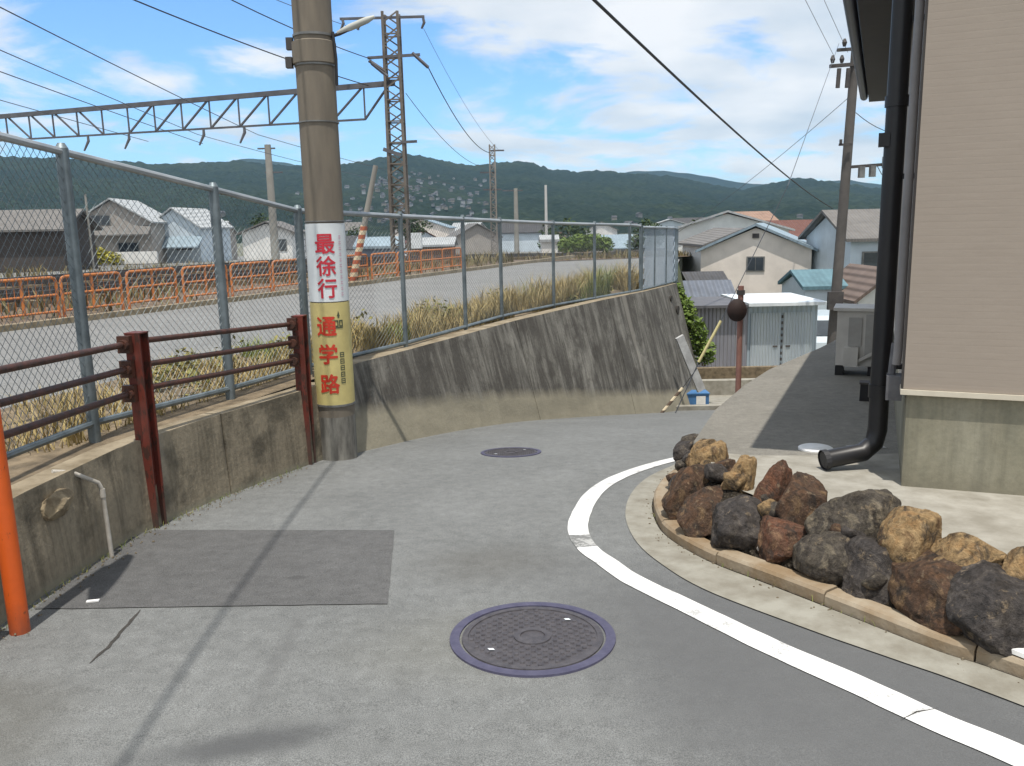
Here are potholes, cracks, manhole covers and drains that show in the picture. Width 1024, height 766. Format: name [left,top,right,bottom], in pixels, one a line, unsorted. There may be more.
manhole cover [450,602,616,678]
manhole cover [481,447,541,458]
crack [90,610,140,663]
